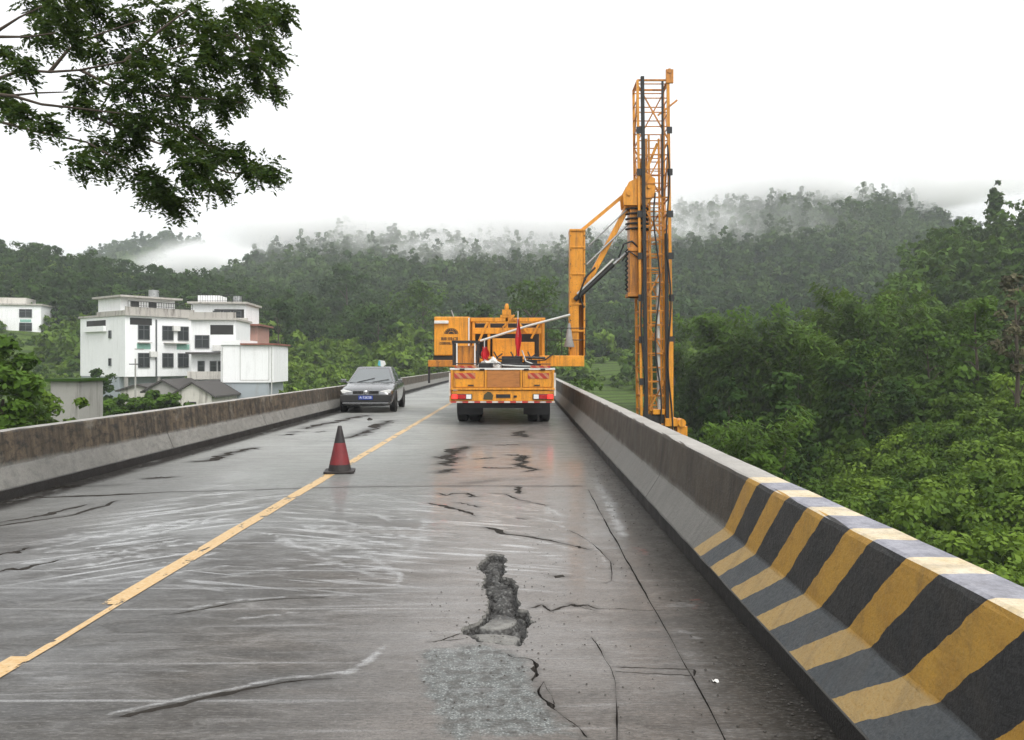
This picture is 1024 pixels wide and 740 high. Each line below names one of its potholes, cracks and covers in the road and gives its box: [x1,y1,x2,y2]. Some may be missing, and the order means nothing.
crack [119,678,331,717]
crack [0,477,393,526]
crack [286,416,393,438]
pothole [461,553,536,647]
crack [508,654,587,737]
crack [428,431,612,582]
crack [591,637,696,736]
crack [166,597,324,615]
crack [0,547,58,572]
crack [196,448,257,462]
